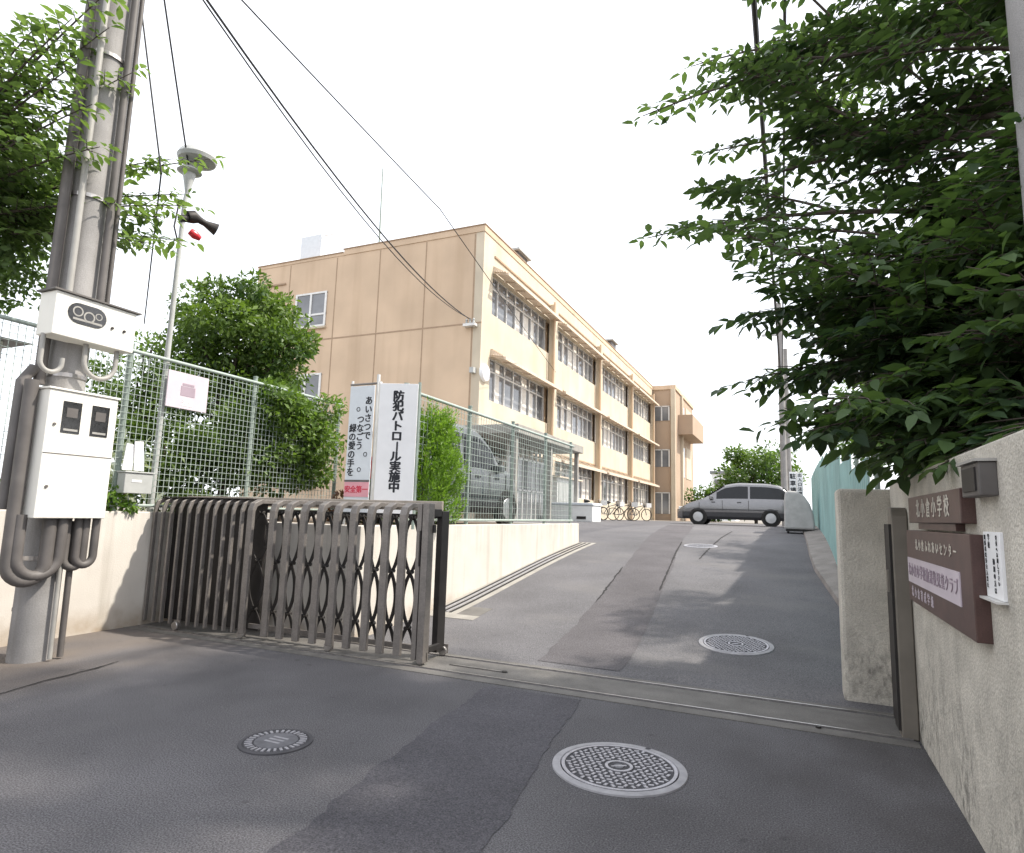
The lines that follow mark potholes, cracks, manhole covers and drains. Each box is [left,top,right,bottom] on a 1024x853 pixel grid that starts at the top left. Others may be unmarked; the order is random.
manhole cover [552,742,688,798]
manhole cover [237,729,313,756]
manhole cover [699,634,774,656]
